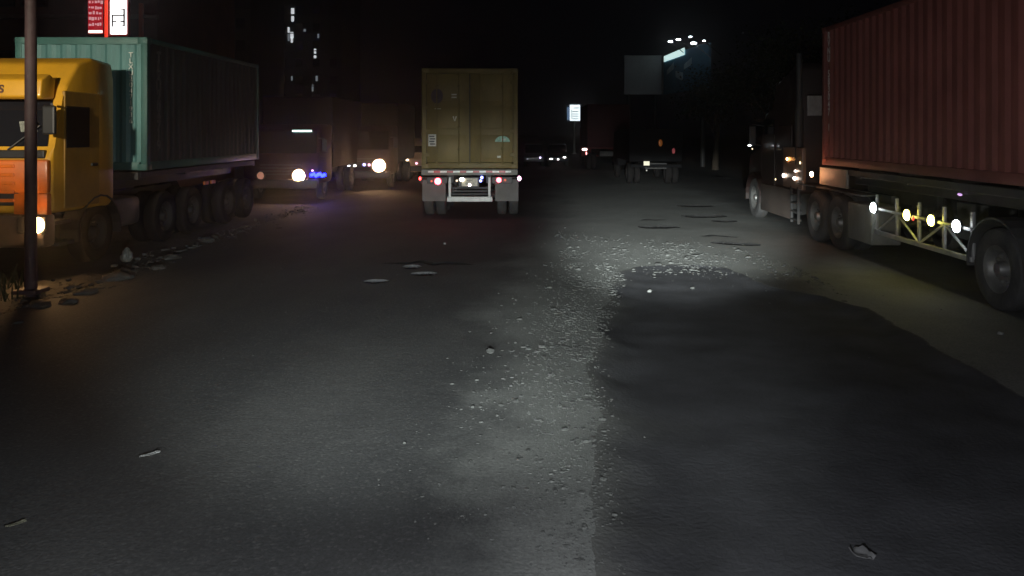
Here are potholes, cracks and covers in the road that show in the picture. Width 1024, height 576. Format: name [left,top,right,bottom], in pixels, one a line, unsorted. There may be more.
pothole [586,264,1024,576]
